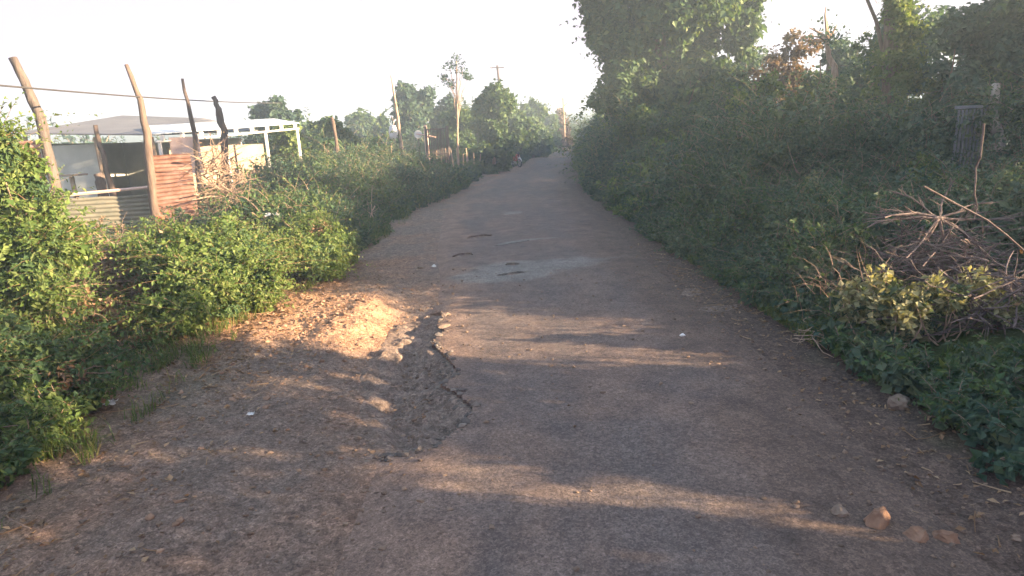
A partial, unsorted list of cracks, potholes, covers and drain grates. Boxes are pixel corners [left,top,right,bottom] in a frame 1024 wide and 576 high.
pothole [353,316,473,462]
